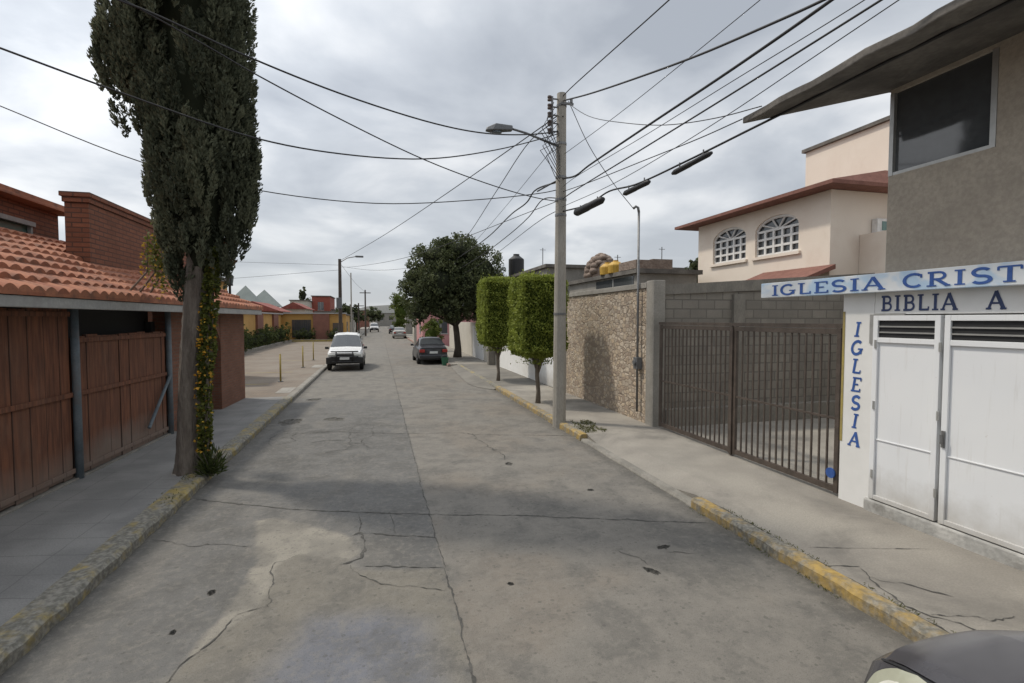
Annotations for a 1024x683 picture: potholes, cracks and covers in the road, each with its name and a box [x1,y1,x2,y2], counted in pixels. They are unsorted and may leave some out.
crack [192,348,1014,683]
crack [166,555,297,683]
